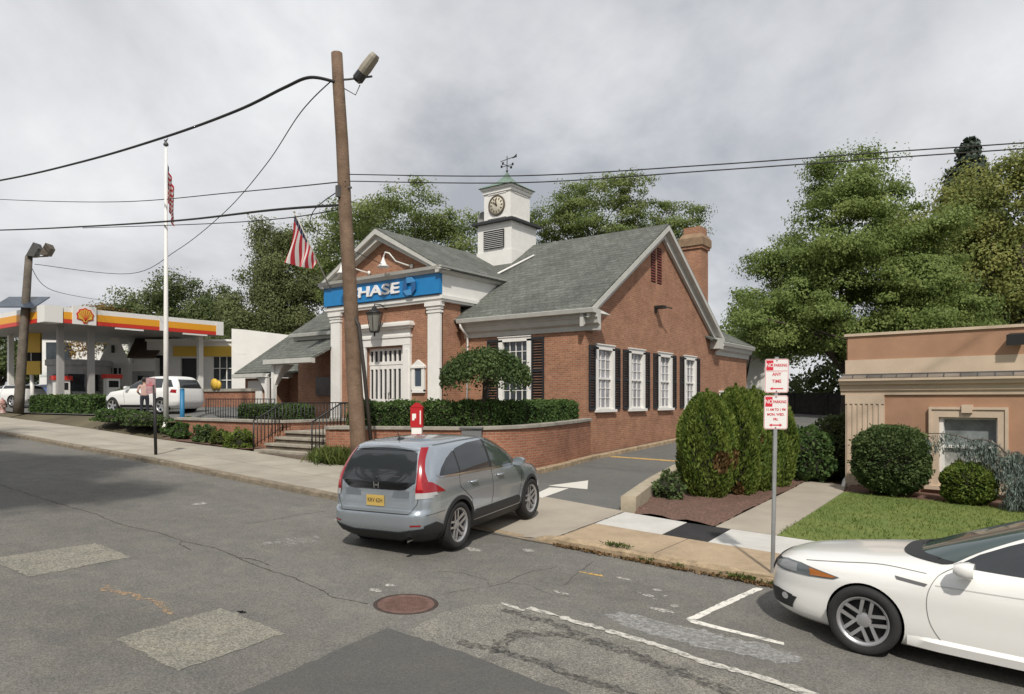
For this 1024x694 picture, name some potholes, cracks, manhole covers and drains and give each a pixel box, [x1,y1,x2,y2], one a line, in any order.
crack [441,562,592,597]
manhole cover [373,594,439,615]
crack [1,485,368,604]
